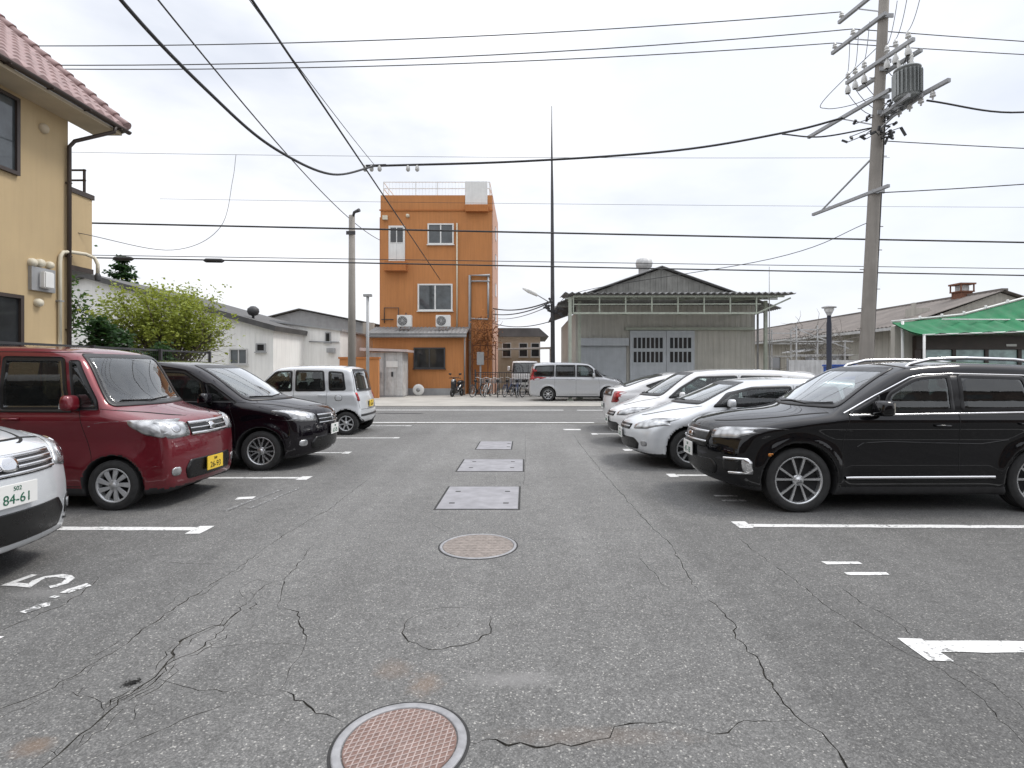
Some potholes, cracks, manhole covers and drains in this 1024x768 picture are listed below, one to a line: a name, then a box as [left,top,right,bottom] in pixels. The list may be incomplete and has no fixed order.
crack [0,487,358,768]
manhole cover [327,702,470,768]
crack [741,540,1024,744]
manhole cover [438,534,518,560]
crack [401,607,492,650]
crack [470,437,848,768]
